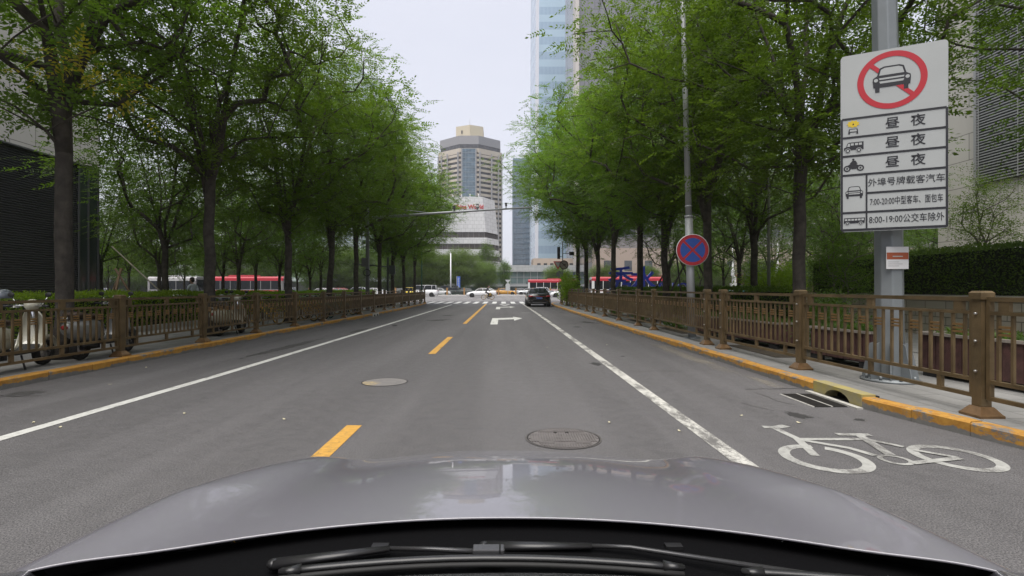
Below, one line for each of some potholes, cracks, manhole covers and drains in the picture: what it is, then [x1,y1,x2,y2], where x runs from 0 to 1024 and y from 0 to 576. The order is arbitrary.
manhole cover [361,378,408,386]
manhole cover [525,428,602,449]
drain grate [780,390,863,410]
